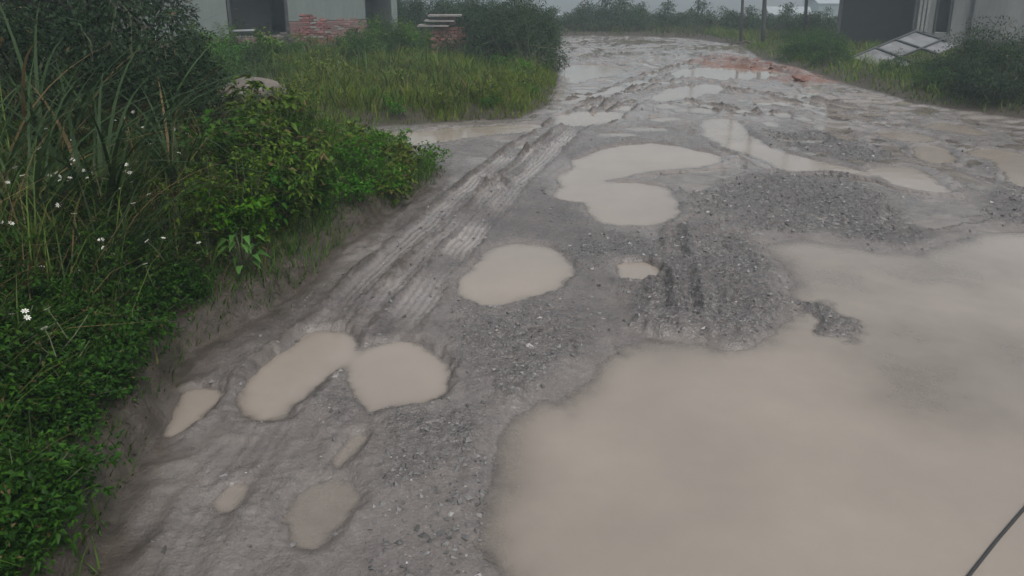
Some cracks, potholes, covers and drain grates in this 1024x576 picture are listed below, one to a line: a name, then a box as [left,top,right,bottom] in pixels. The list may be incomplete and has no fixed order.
pothole [257,462,385,567]
pothole [688,118,894,182]
pothole [667,63,802,81]
pothole [540,139,738,229]
pothole [865,128,950,144]
pothole [414,220,1024,576]
pothole [205,317,383,435]
pothole [643,82,731,103]
pothole [895,142,970,168]
pothole [858,161,970,197]
pothole [307,419,382,495]
